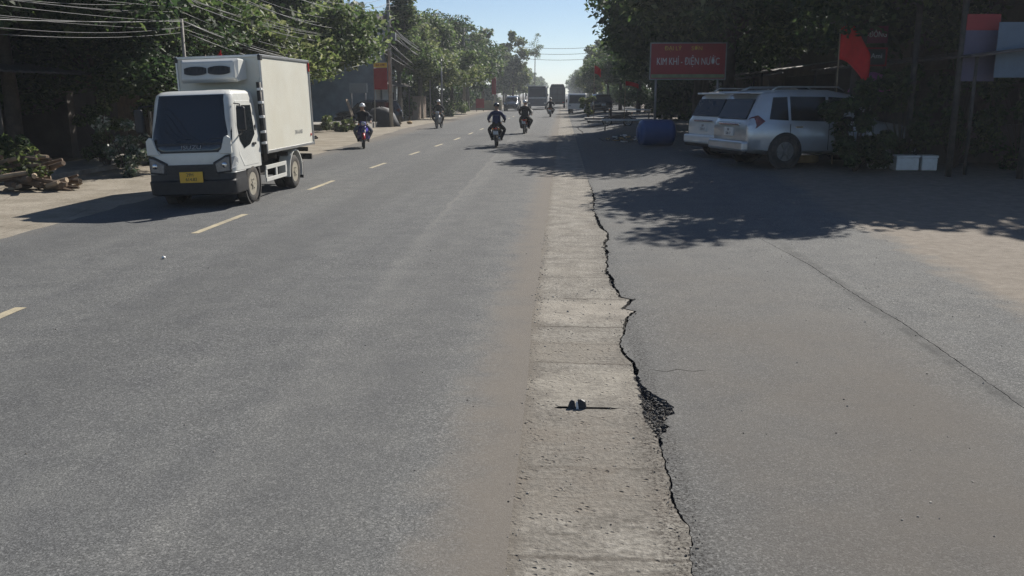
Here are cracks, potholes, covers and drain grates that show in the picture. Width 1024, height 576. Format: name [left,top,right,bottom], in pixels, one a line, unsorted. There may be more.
crack [588,181,639,374]
crack [658,438,694,576]
pothole [633,374,675,439]
